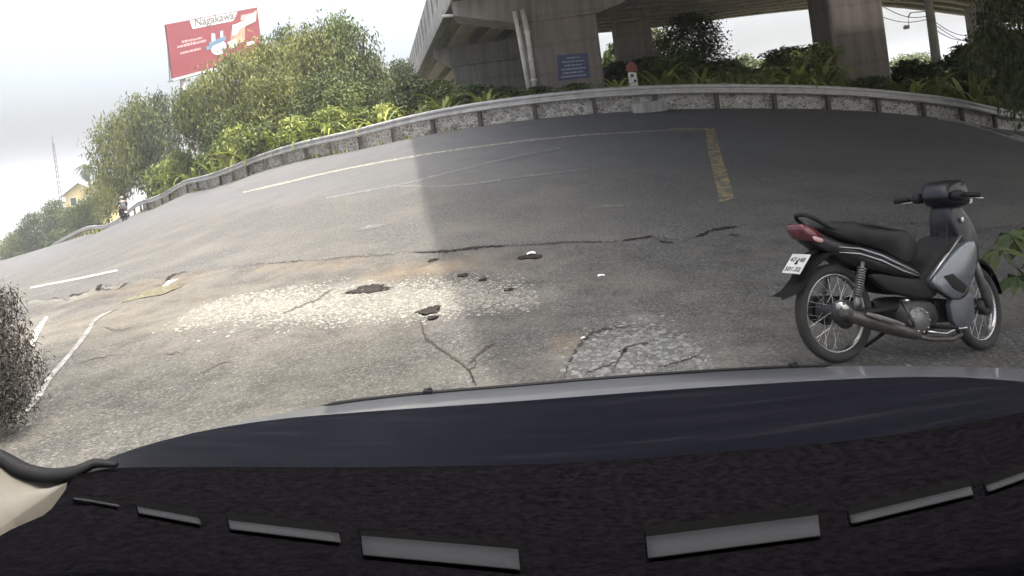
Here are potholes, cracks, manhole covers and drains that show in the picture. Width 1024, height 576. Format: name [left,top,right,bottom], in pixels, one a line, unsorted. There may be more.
crack [561,325,700,379]
pothole [345,284,390,294]
crack [693,226,739,238]
crack [420,318,496,370]
crack [258,254,389,264]
crack [419,235,671,253]
pothole [415,305,441,315]
